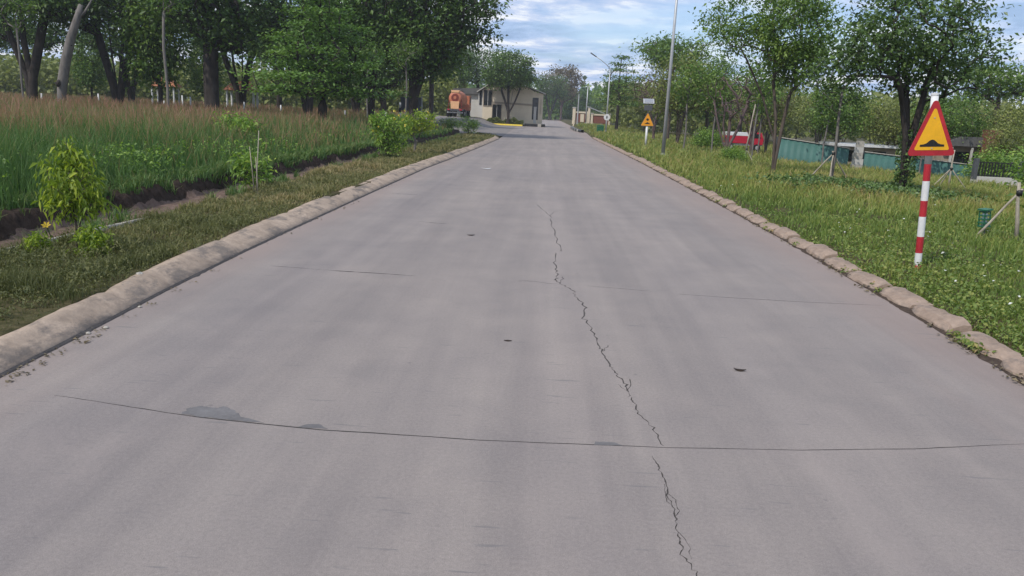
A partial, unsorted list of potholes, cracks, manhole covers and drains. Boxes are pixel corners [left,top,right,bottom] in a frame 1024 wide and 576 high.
crack [542,209,698,576]
